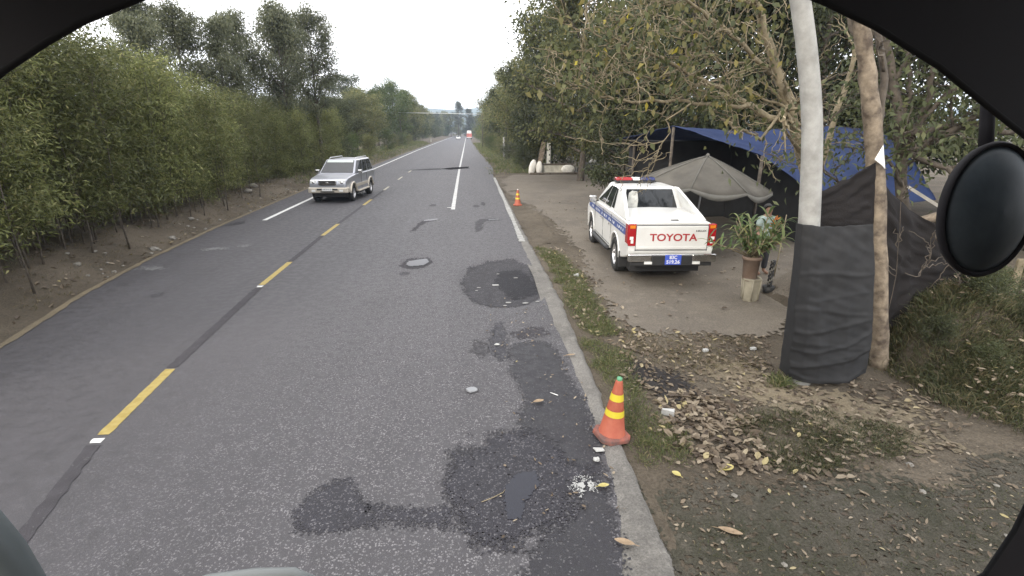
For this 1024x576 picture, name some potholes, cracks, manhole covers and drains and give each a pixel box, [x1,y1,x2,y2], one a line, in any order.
pothole [433,426,601,555]
